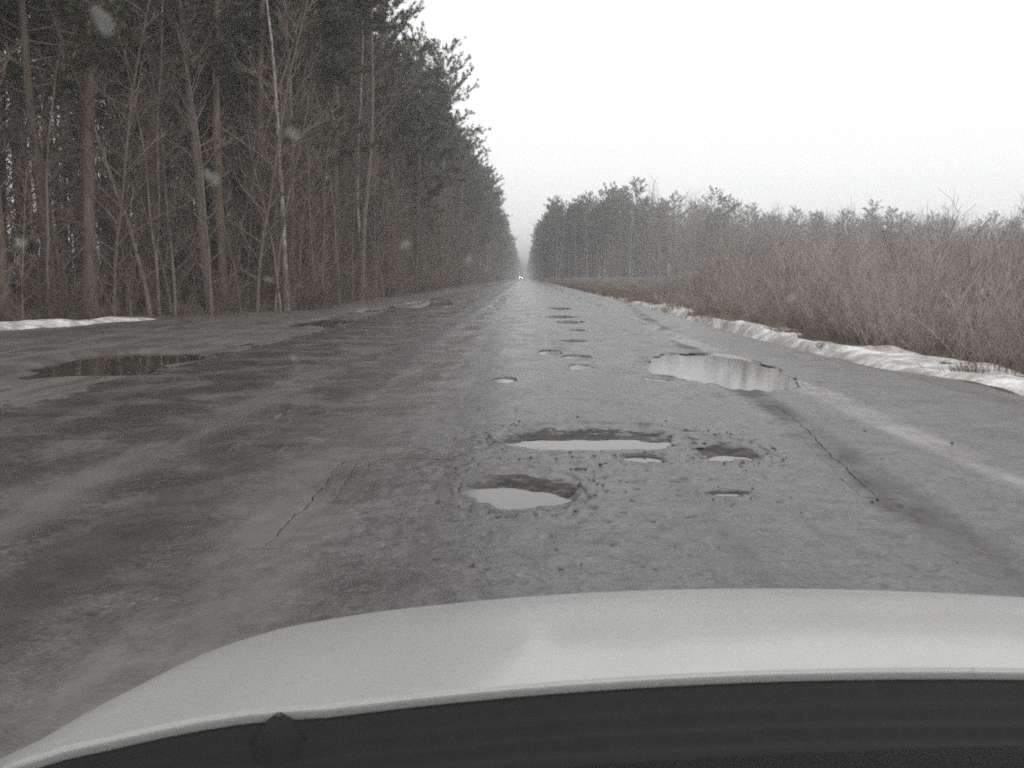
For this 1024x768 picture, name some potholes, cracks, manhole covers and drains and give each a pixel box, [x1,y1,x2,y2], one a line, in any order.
pothole [695,485,759,501]
pothole [486,375,520,385]
pothole [633,352,808,395]
pothole [670,431,778,465]
pothole [447,460,600,518]
pothole [485,418,706,456]
crack [242,452,454,549]
pothole [565,363,600,371]
pothole [556,353,596,362]
crack [765,405,895,500]
